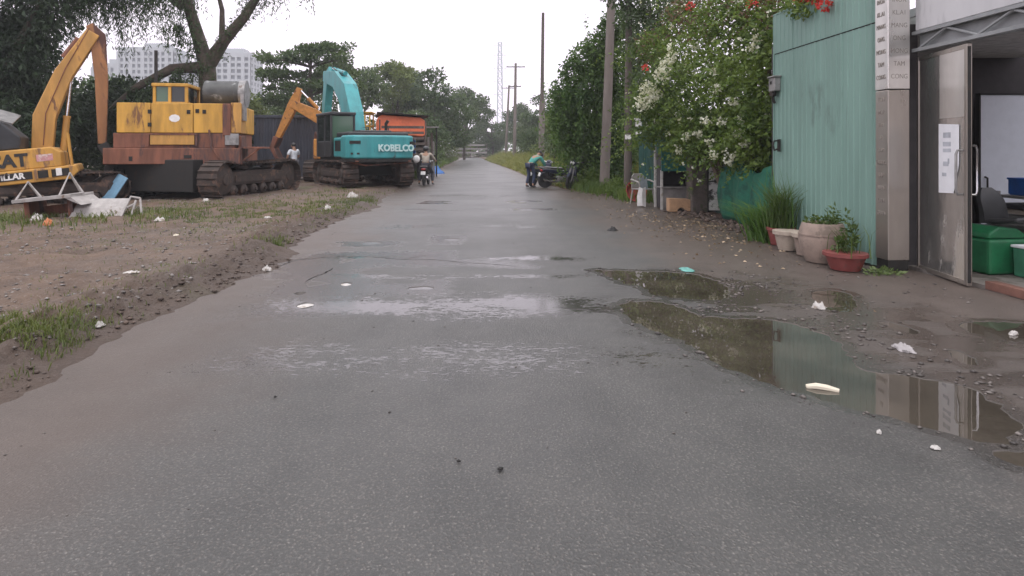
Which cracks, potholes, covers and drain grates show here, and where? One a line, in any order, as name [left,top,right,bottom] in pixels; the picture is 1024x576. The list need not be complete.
crack [280,255,517,282]
